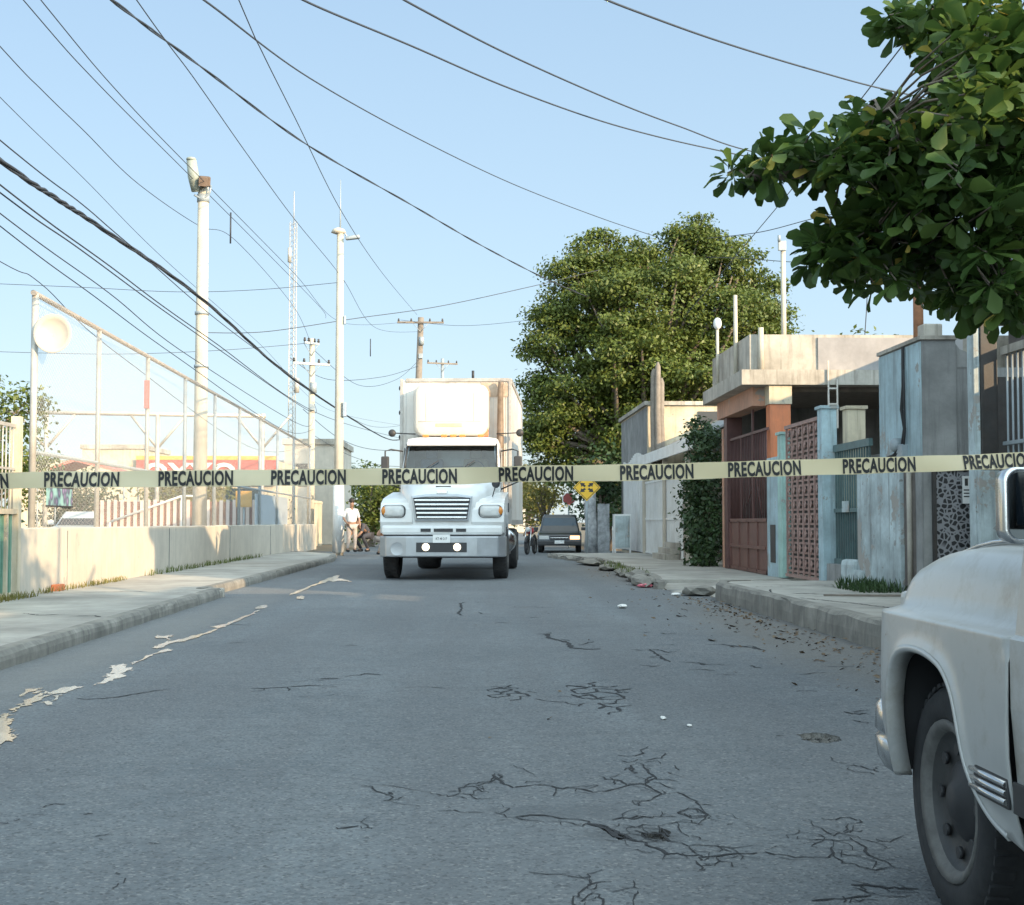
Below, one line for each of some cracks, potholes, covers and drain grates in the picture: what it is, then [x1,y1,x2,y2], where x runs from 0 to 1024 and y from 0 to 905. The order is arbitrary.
crack [457,602,594,649]
crack [487,682,633,714]
crack [251,673,380,697]
crack [435,746,919,902]
crack [336,784,431,829]
crack [631,632,728,675]
pothole [797,733,842,744]
